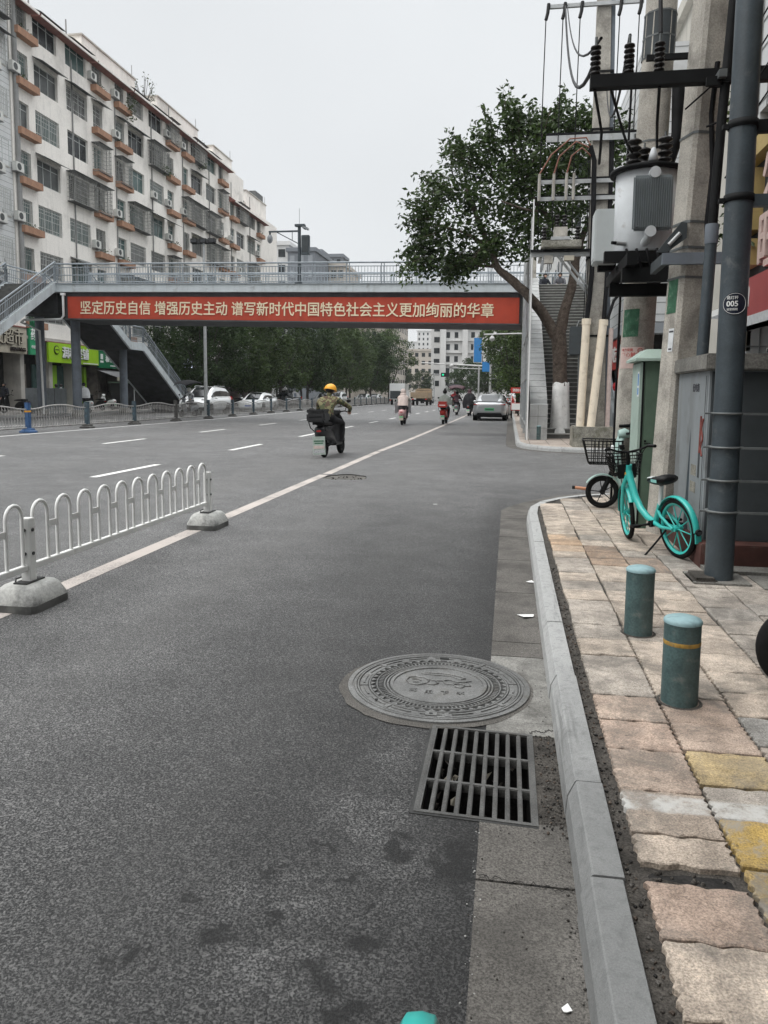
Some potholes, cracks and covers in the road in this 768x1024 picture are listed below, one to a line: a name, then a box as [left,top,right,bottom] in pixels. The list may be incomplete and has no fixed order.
drain grate [409,724,539,829]
manhole cover [339,653,533,729]
